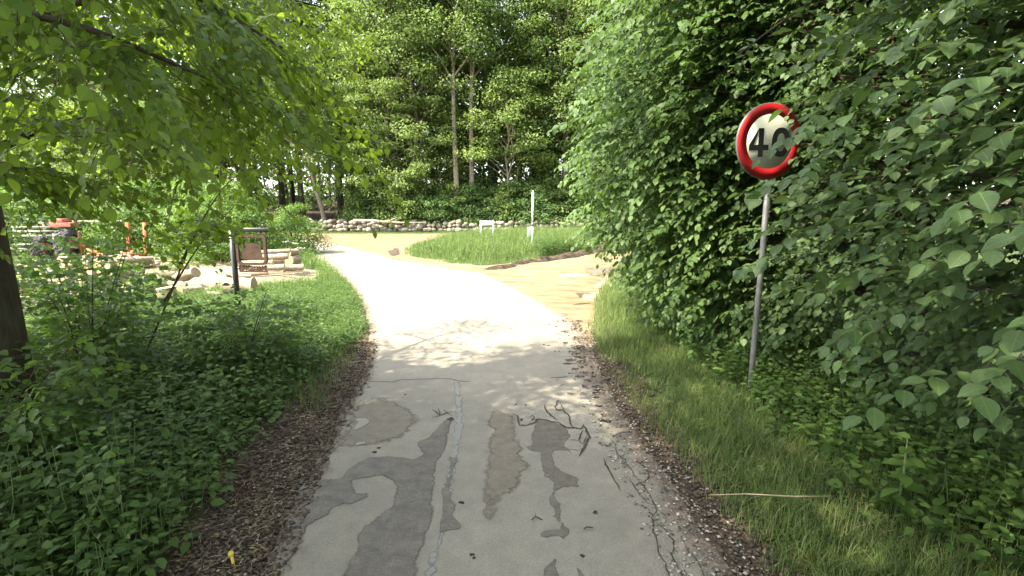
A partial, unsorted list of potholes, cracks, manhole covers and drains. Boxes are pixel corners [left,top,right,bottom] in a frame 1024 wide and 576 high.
crack [512,376,704,576]
